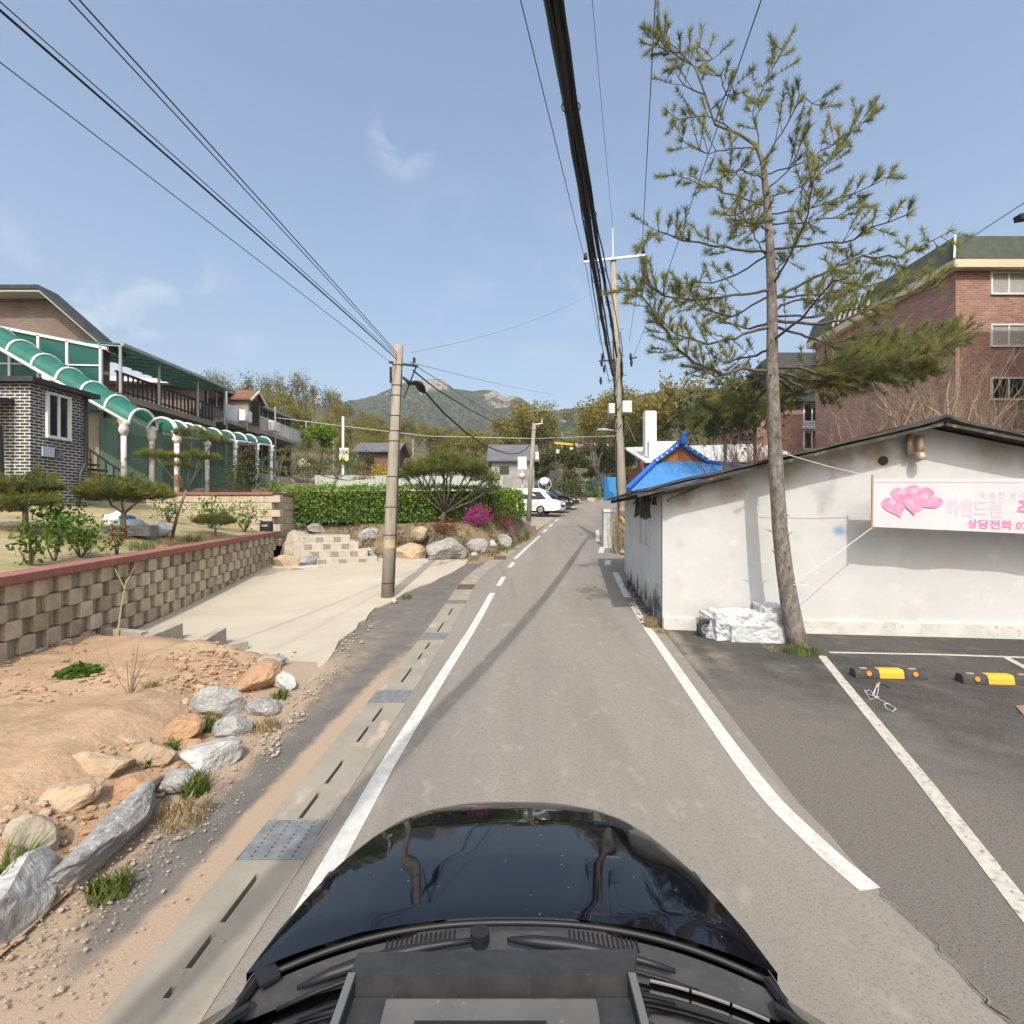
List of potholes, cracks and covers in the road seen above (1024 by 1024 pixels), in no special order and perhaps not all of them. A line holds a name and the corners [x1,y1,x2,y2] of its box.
drain grate [369,690,412,703]
drain grate [237,820,327,860]
